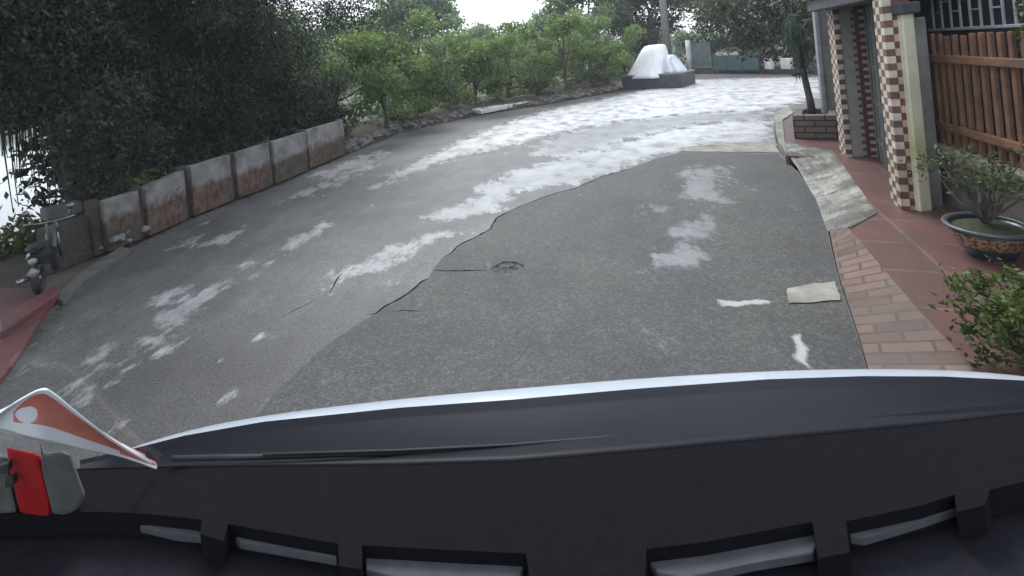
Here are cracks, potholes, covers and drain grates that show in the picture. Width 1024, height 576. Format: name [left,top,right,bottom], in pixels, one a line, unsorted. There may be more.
crack [369,169,627,315]
pothole [491,261,525,274]
